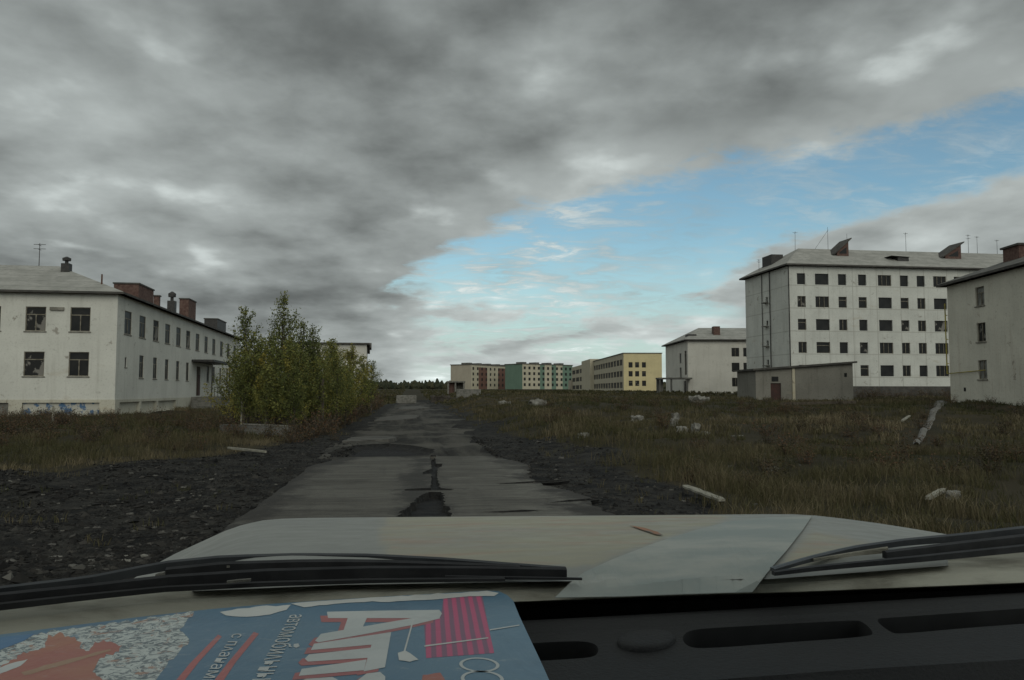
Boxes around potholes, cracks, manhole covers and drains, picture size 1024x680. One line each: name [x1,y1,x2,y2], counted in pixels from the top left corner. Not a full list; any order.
crack [403,455,454,491]
pothole [322,443,442,458]
pothole [395,492,454,517]
crack [483,480,599,513]
